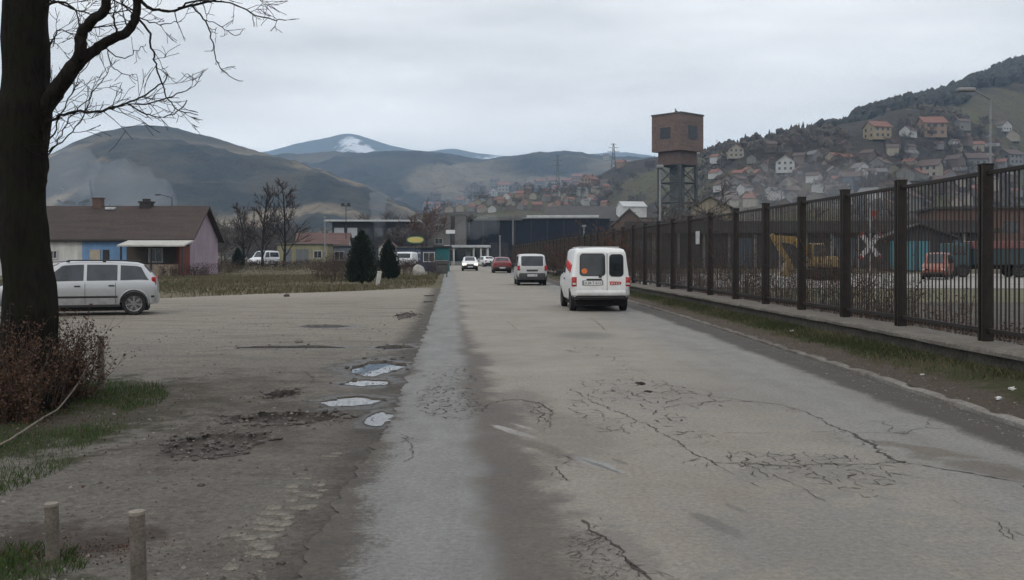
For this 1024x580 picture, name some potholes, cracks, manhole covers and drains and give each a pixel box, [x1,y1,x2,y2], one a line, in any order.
pothole [213,407,359,427]
pothole [345,356,413,379]
crack [556,519,671,580]
crack [418,363,567,431]
pothole [318,395,390,407]
pothole [259,387,302,399]
crack [566,318,1024,500]
pothole [156,429,283,461]
pothole [363,410,396,426]
